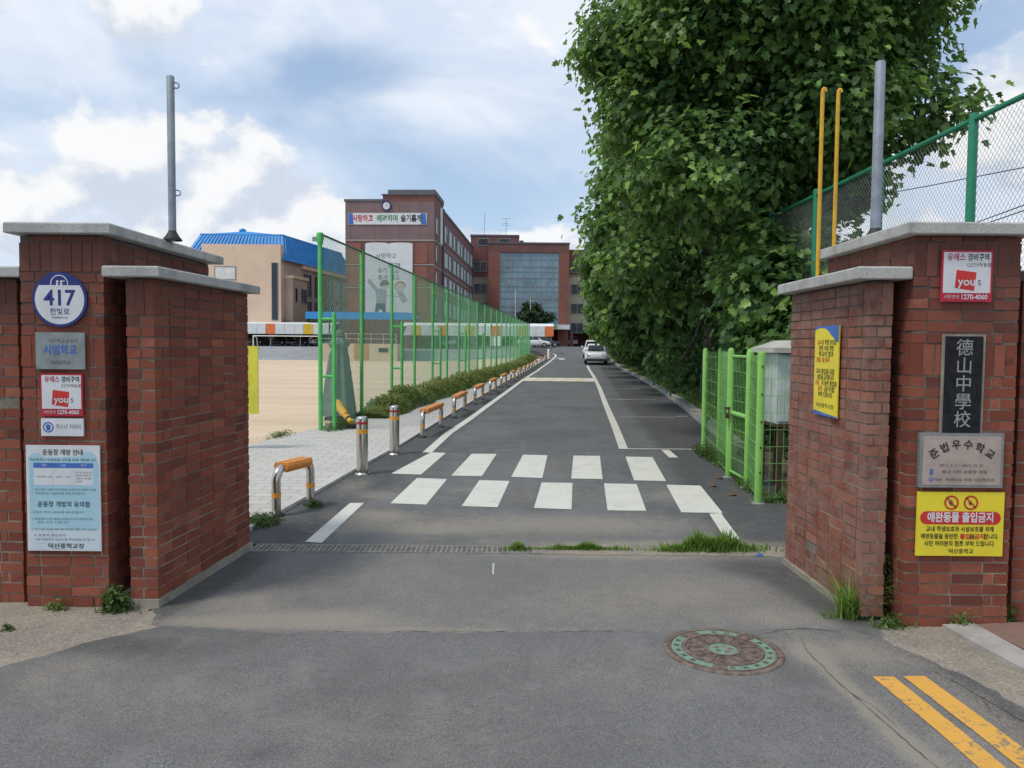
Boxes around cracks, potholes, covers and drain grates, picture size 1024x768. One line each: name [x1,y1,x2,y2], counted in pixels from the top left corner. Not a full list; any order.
drain grate [249,544,533,554]
manhole cover [663,628,785,676]
crack [766,628,939,768]
